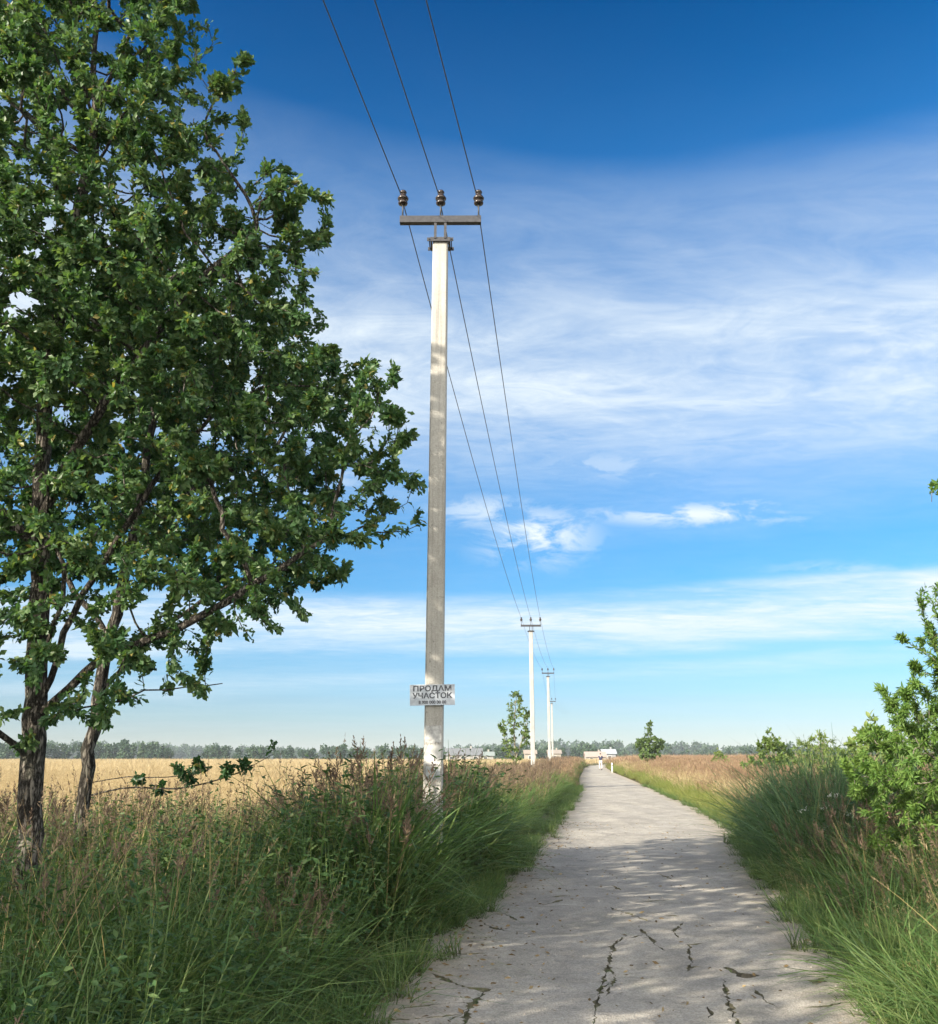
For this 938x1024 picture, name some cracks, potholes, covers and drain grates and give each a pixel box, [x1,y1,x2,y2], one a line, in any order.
crack [592,900,701,1024]
crack [386,973,491,1024]
crack [707,980,741,1024]
